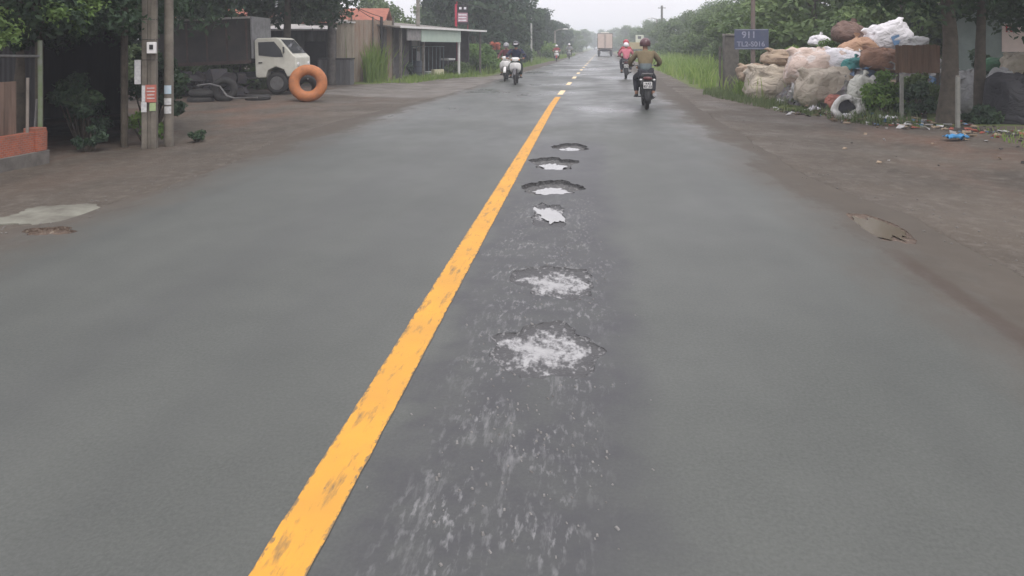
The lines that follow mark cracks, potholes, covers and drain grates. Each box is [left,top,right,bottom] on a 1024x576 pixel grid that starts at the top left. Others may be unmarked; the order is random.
pothole [22,226,77,235]
pothole [551,143,588,151]
pothole [489,320,607,379]
pothole [531,203,566,228]
pothole [528,157,579,170]
pothole [521,180,586,195]
pothole [846,213,917,244]
pothole [509,266,594,301]
